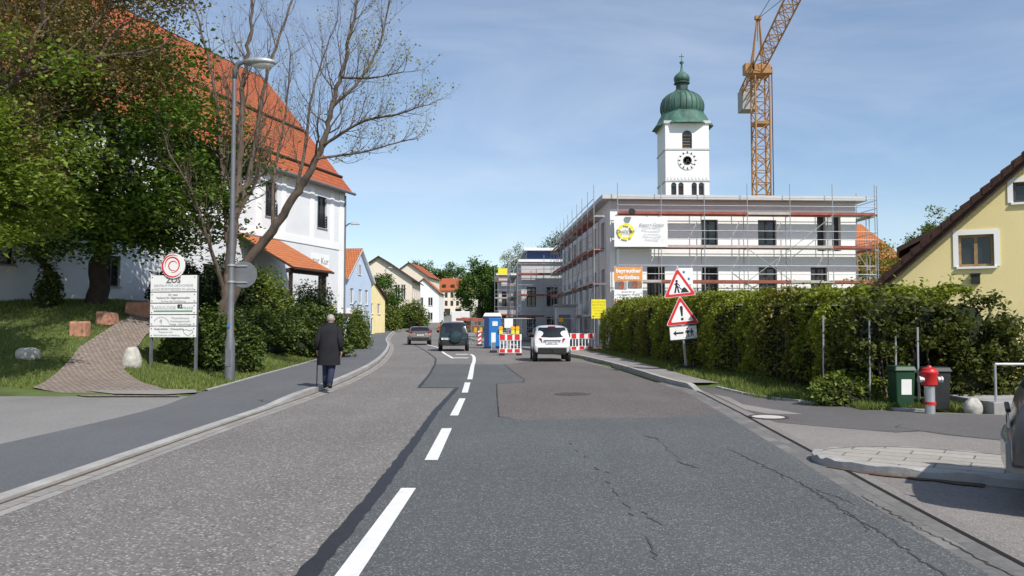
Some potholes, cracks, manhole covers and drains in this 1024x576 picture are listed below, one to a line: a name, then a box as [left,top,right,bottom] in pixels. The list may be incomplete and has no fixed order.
crack [727,447,1015,576]
